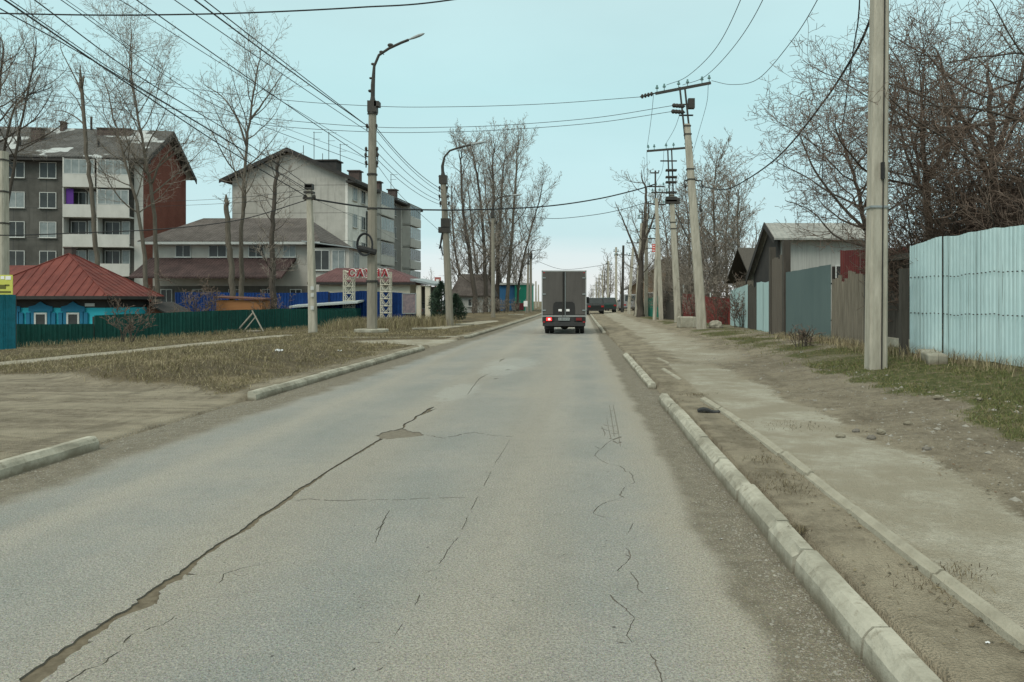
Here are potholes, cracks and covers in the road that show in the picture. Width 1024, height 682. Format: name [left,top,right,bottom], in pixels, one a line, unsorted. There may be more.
crack [593,405,663,682]
pothole [376,428,423,440]
crack [19,439,463,682]
crack [403,407,513,438]
